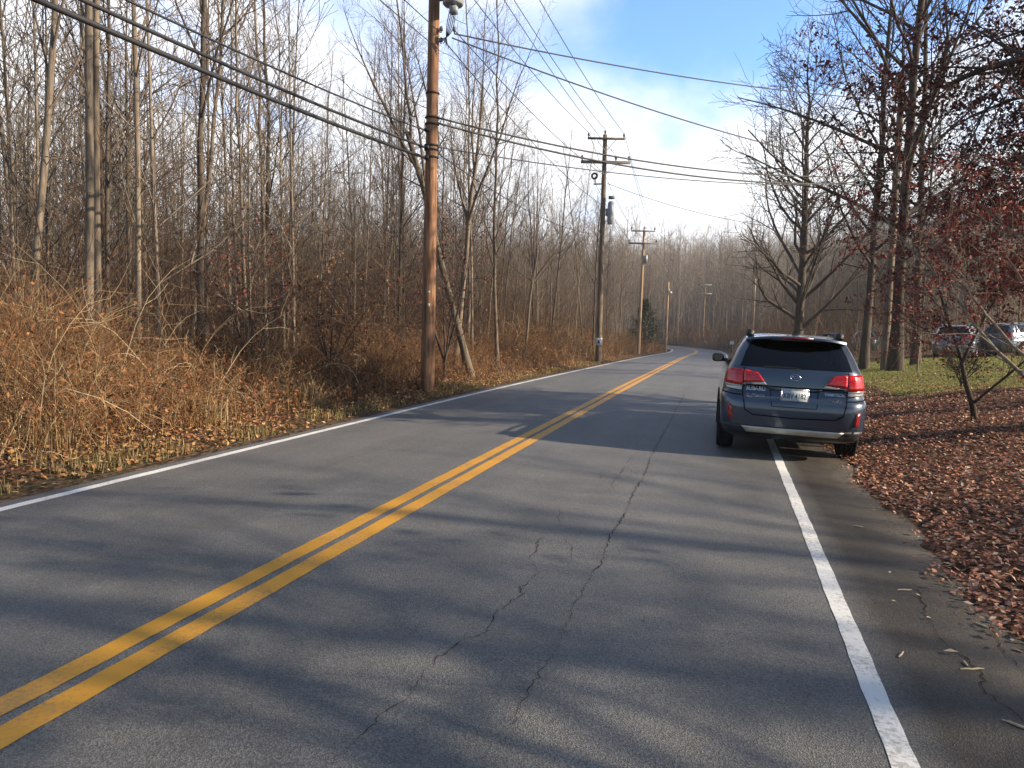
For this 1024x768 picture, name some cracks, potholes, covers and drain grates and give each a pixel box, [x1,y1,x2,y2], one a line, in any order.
crack [918,590,1023,720]
crack [327,538,541,766]
crack [510,399,682,734]
